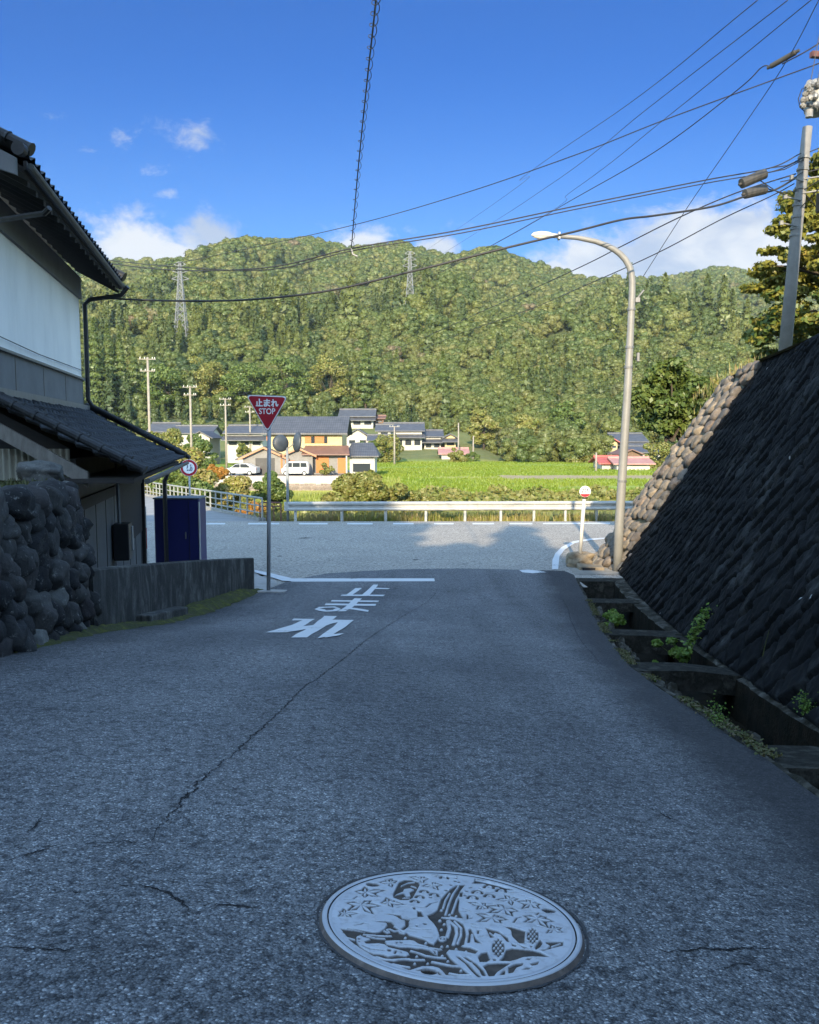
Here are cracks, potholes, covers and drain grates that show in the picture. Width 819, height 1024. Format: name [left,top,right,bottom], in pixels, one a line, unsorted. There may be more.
crack [0,889,150,958]
manhole cover [316,870,590,995]
crack [85,588,438,845]
crack [118,883,315,917]
crack [1,818,47,862]
crack [657,946,785,971]
